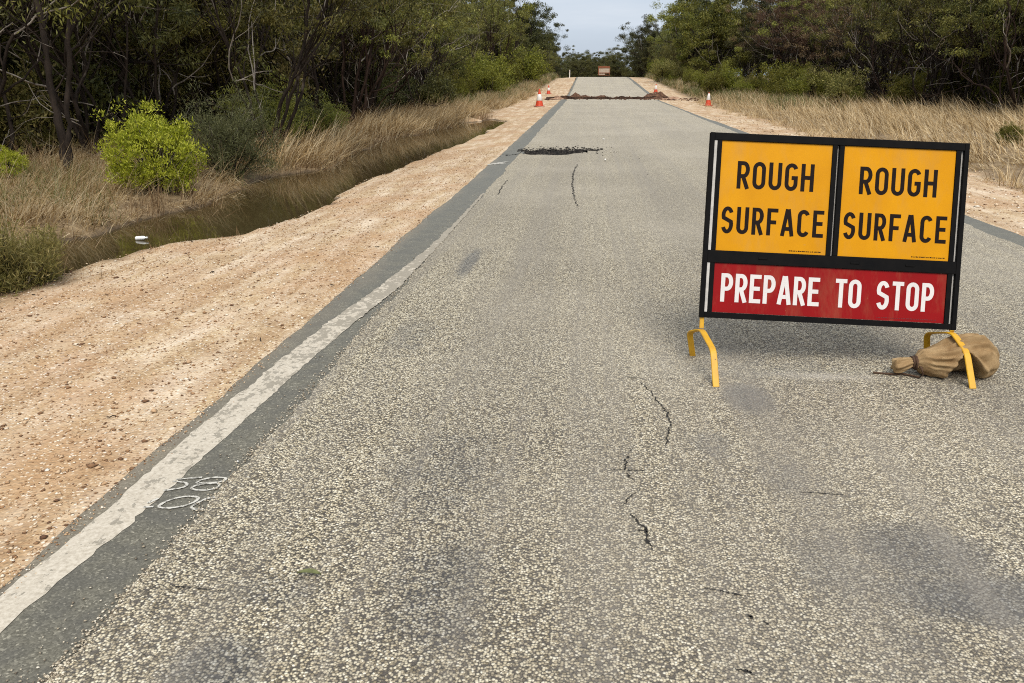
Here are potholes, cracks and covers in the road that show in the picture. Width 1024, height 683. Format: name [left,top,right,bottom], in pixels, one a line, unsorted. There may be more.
crack [627,377,672,444]
crack [613,448,653,549]
